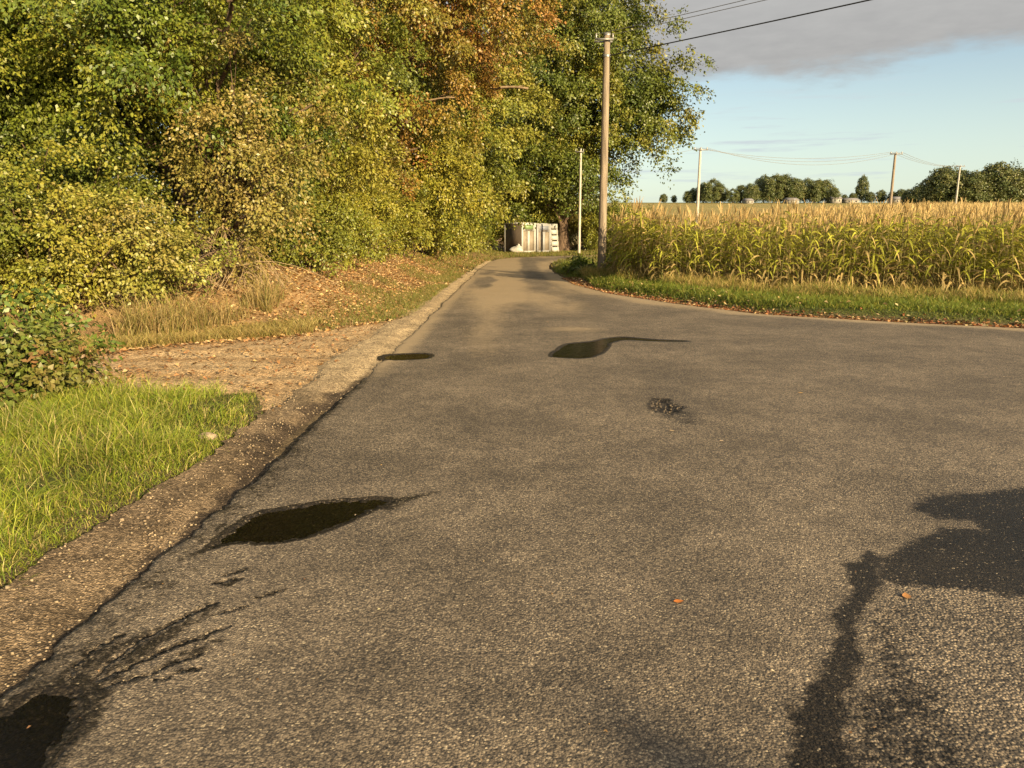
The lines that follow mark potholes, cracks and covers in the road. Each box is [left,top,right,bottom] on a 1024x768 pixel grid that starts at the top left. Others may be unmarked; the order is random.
pothole [204,496,400,550]
pothole [548,336,689,359]
pothole [633,398,688,415]
pothole [0,682,90,768]
